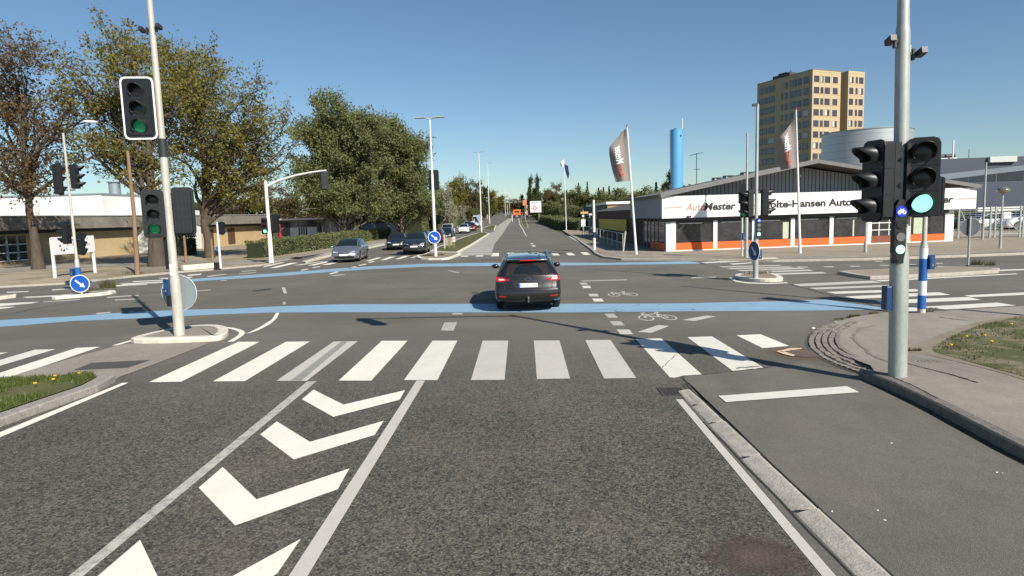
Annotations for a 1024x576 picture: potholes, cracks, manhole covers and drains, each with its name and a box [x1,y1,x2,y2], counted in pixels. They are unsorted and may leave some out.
drain grate [657,387,682,396]
